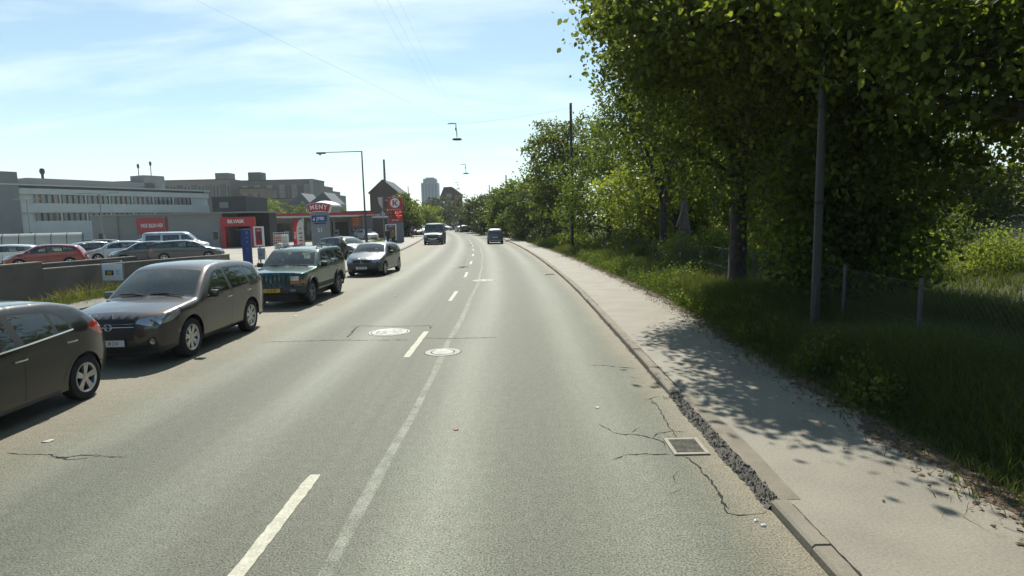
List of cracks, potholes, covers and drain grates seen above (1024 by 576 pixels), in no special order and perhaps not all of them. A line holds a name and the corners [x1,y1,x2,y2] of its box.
crack [601,397,683,460]
manhole cover [425,348,461,356]
manhole cover [368,328,410,336]
crack [672,456,765,515]
drain grate [663,437,710,456]
